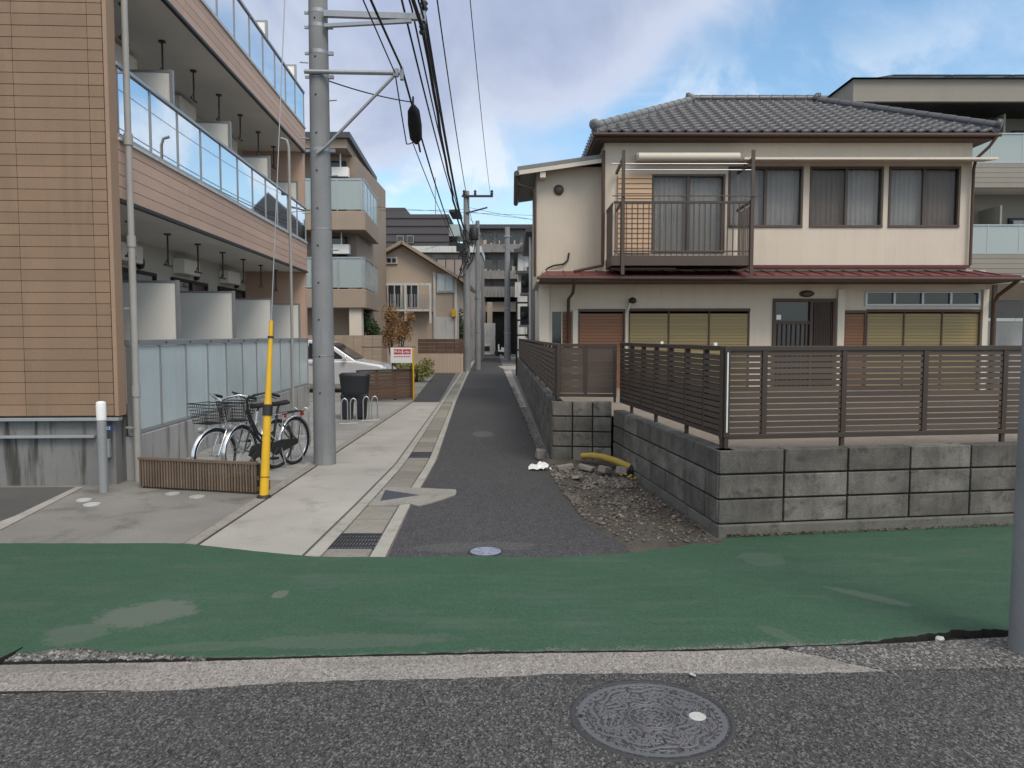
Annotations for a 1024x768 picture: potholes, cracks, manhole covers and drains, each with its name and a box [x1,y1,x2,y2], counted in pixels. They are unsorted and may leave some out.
manhole cover [468,546,504,556]
drain grate [328,533,383,550]
manhole cover [570,680,736,762]
